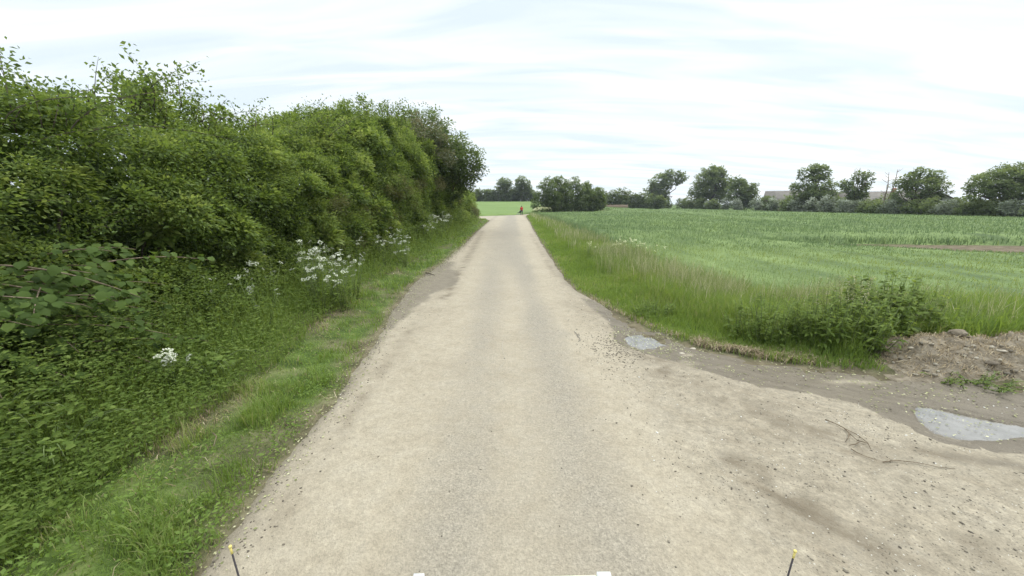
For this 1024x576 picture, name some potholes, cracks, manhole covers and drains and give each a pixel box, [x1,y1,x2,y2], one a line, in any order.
pothole [614,331,679,354]
